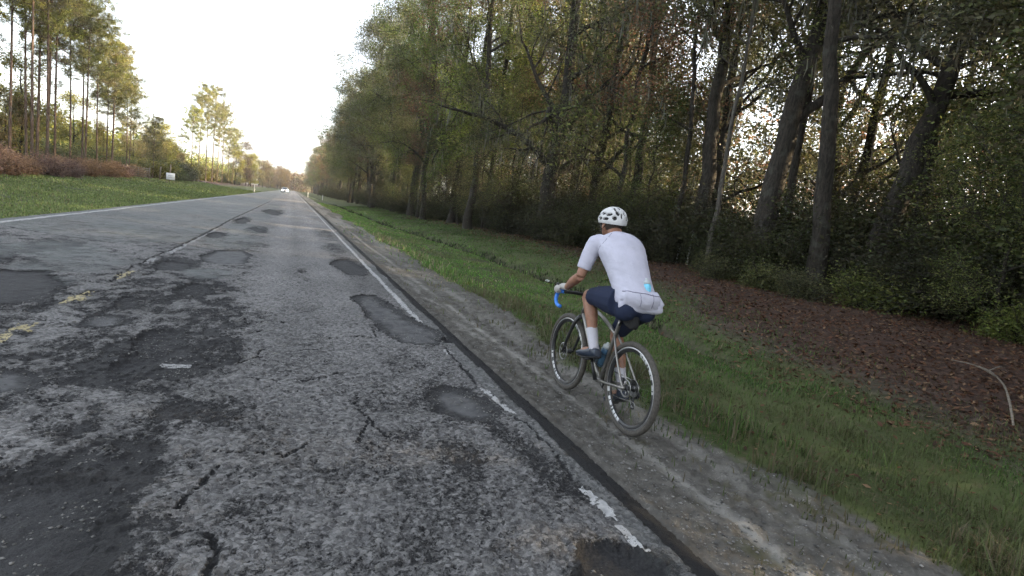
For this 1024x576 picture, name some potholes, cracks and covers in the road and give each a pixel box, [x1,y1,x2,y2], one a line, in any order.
pothole [0,269,69,304]
pothole [563,537,674,576]
pothole [198,249,253,265]
pothole [422,384,503,423]
pothole [328,259,368,276]
pothole [348,294,446,345]
pothole [79,313,128,328]
crack [197,531,224,576]
crack [237,321,404,443]
